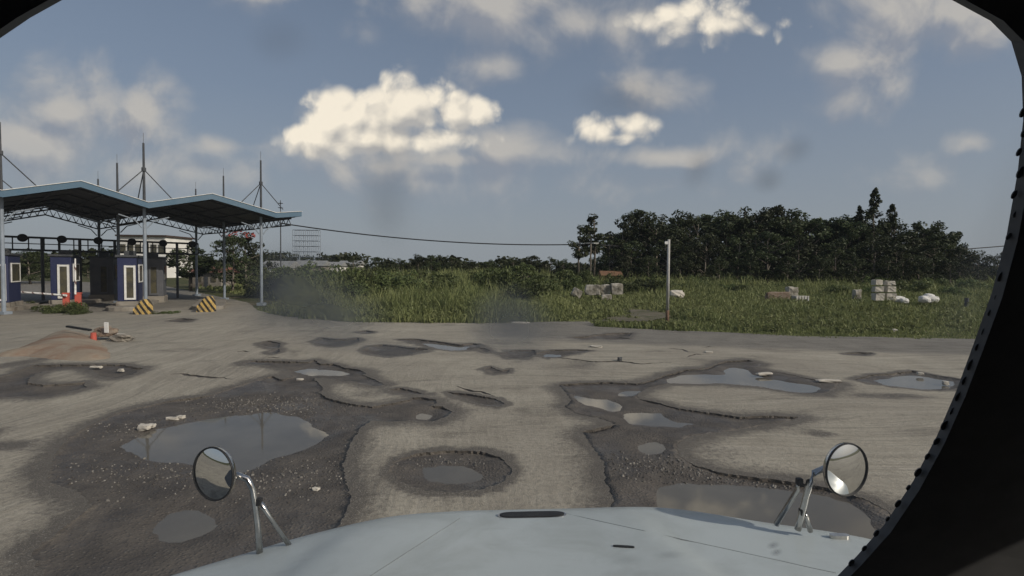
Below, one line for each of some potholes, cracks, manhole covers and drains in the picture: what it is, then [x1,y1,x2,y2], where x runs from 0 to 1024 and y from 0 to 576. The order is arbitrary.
pothole [388,450,512,492]
pothole [559,360,891,539]
pothole [447,392,504,406]
pothole [31,360,452,576]
pothole [399,339,481,351]
pothole [0,364,142,397]
pothole [313,338,359,347]
pothole [855,371,961,390]
pothole [362,345,428,357]
